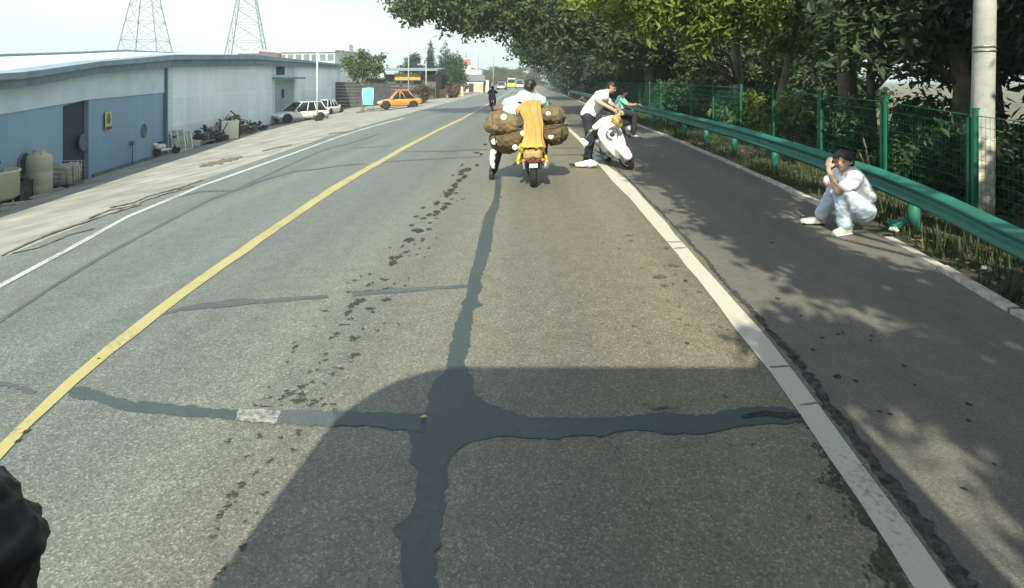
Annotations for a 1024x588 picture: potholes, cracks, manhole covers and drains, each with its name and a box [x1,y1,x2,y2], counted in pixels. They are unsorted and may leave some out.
crack [0,179,203,256]
